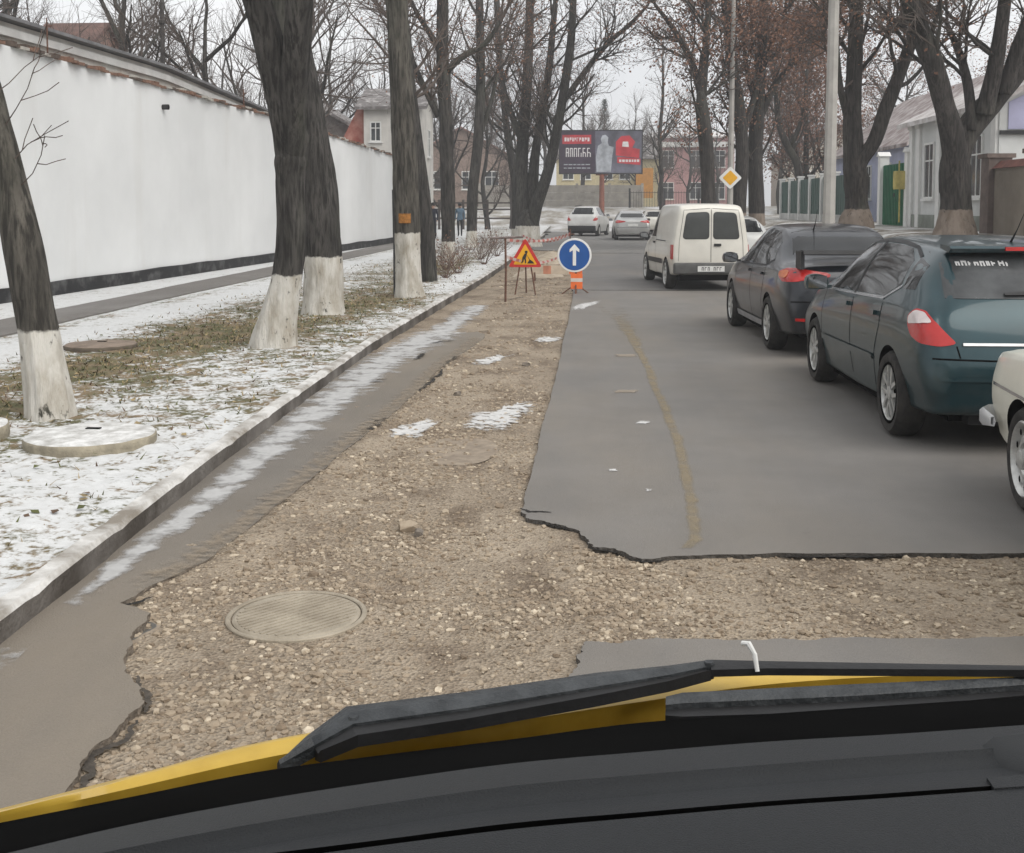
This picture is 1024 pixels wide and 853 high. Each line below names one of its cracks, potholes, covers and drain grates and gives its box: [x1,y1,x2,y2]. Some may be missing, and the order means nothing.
manhole cover [22,422,157,458]
manhole cover [63,340,138,353]
manhole cover [225,591,367,644]
